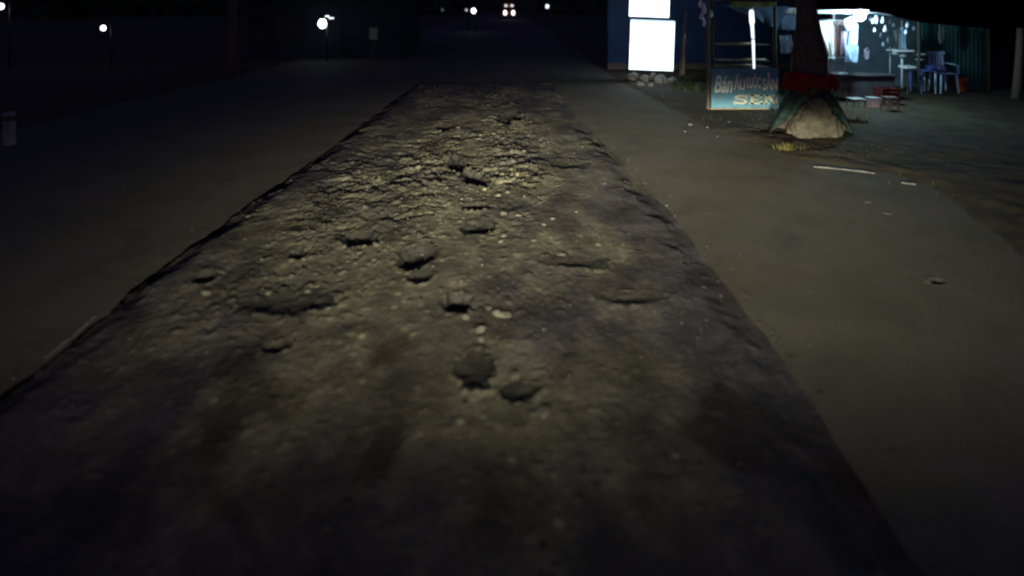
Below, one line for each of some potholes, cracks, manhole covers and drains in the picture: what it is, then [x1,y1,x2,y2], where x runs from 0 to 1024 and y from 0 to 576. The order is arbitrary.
pothole [406,268,435,284]
pothole [500,381,542,404]
pothole [259,338,294,354]
pothole [459,201,495,210]
pothole [593,290,672,306]
pothole [493,112,527,125]
pothole [459,166,492,188]
pothole [538,253,611,270]
pothole [189,268,223,285]
pothole [394,244,441,272]
pothole [234,285,337,317]
pothole [441,292,474,314]
